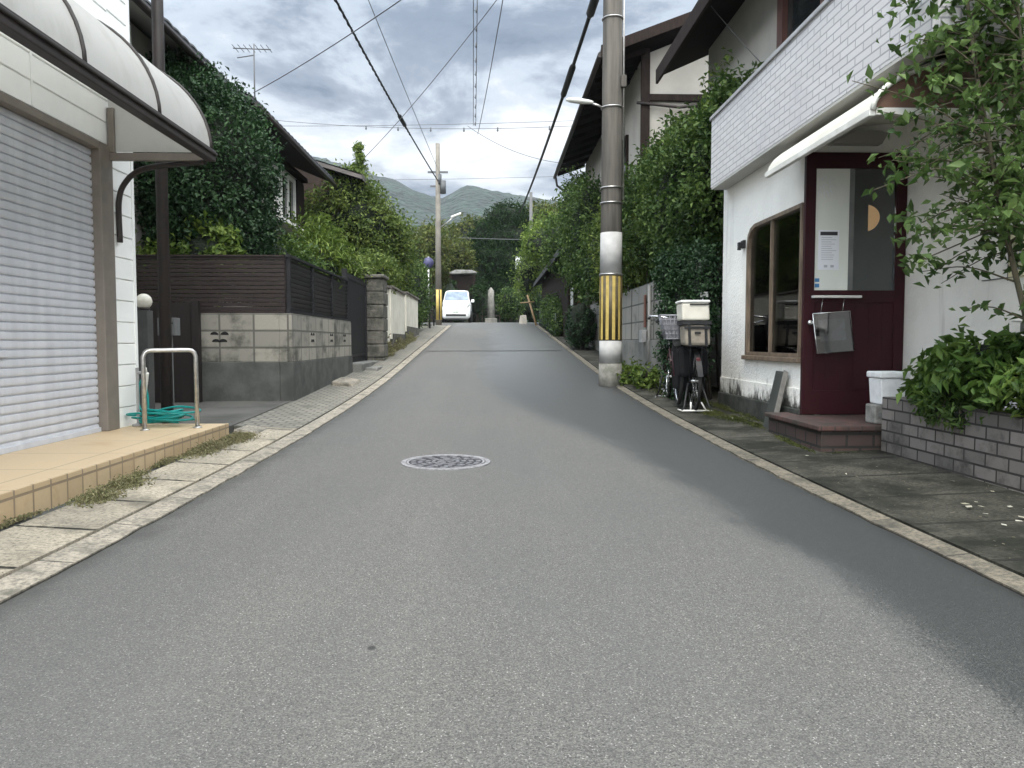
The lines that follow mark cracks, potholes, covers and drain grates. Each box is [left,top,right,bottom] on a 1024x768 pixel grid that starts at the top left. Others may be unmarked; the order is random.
manhole cover [401,454,490,470]
